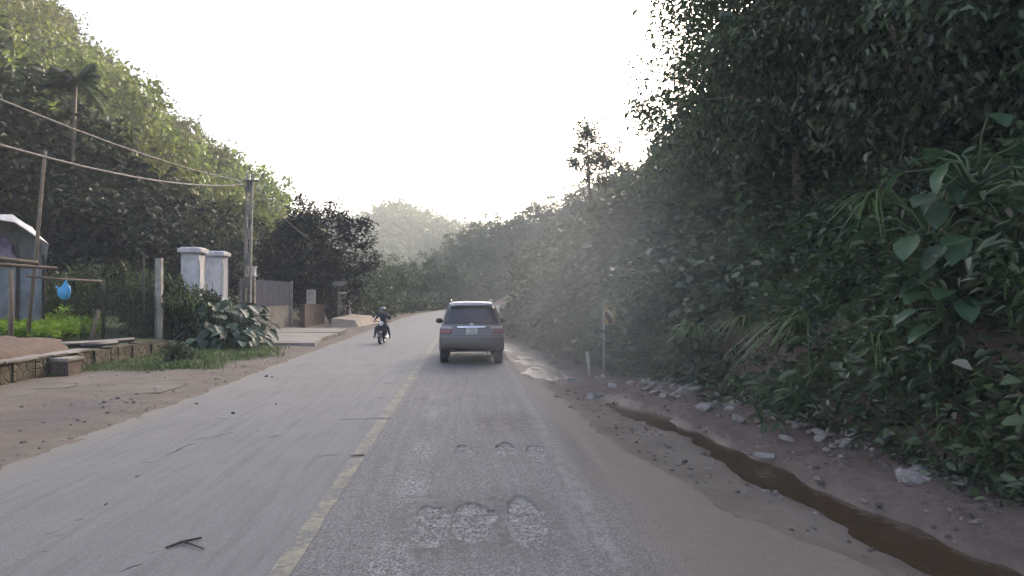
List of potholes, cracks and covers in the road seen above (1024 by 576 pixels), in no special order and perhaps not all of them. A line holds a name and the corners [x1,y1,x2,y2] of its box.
pothole [525,445,547,462]
pothole [454,444,475,459]
pothole [410,504,453,548]
pothole [494,441,518,459]
pothole [505,494,548,550]
pothole [452,501,498,543]
